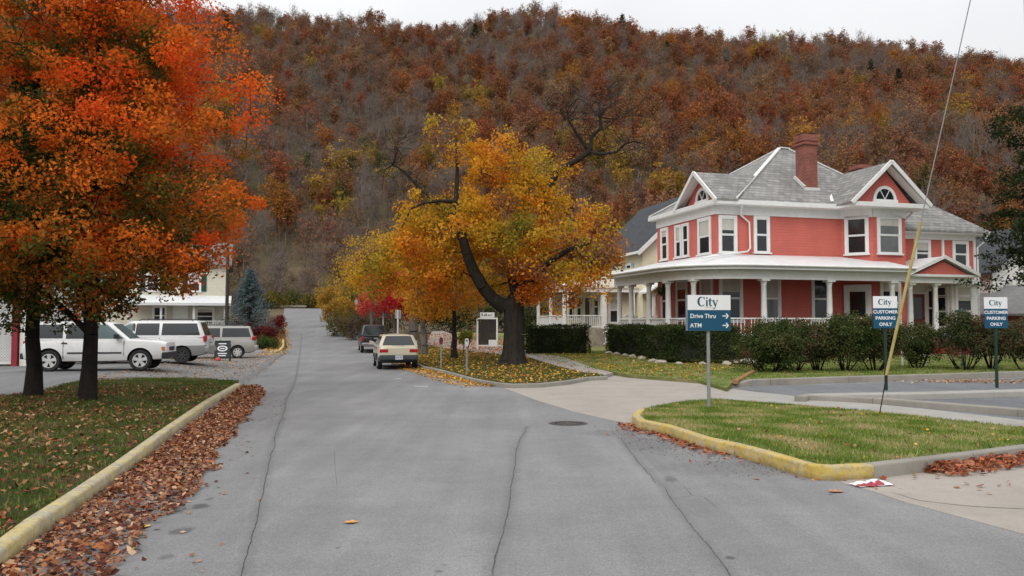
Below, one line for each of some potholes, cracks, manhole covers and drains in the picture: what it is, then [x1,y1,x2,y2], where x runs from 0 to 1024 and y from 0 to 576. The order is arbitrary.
crack [240,338,302,576]
crack [465,427,527,576]
crack [623,441,731,576]
